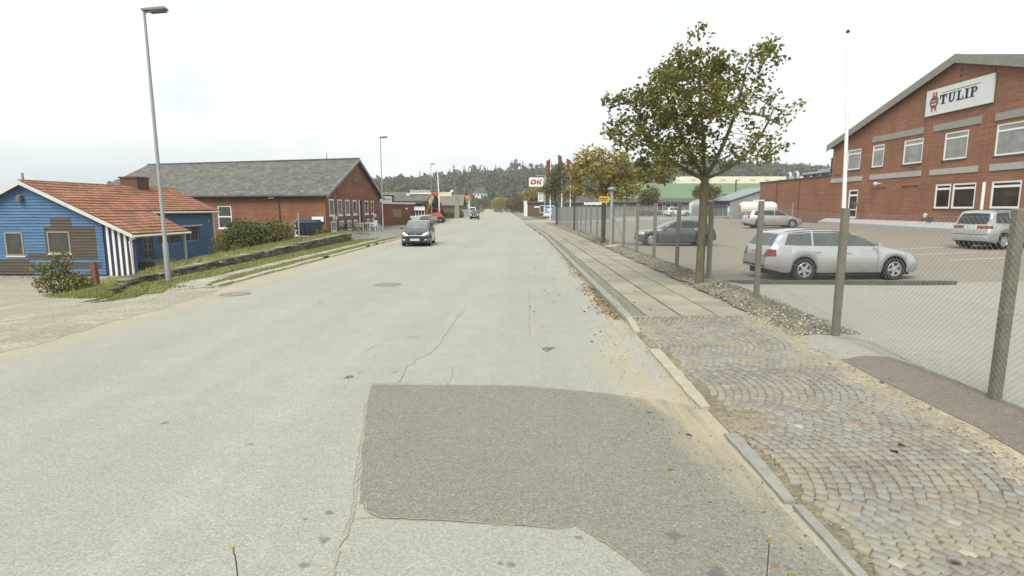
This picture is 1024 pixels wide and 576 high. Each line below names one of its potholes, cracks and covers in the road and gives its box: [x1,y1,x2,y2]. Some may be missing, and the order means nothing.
crack [333,312,649,576]
